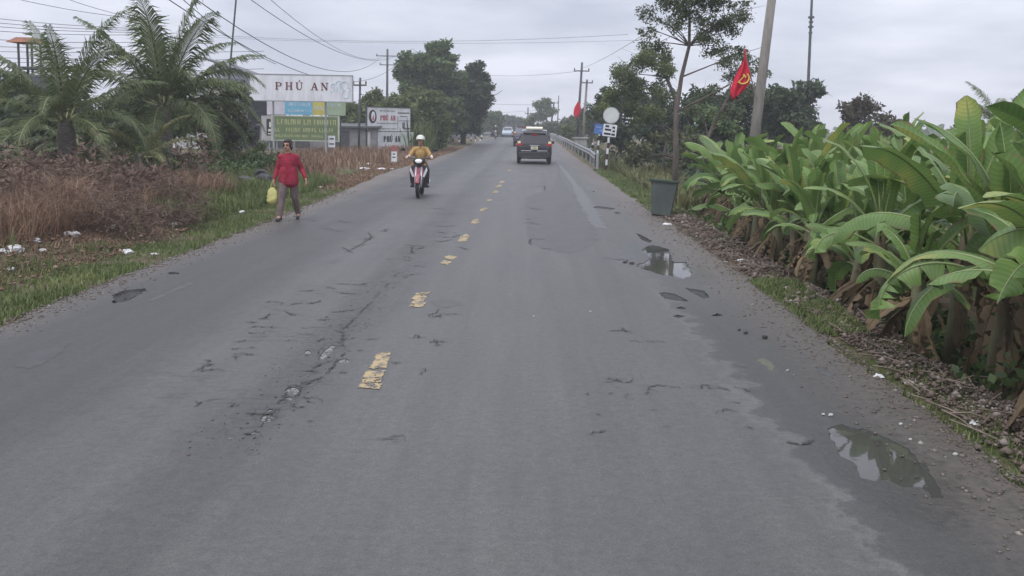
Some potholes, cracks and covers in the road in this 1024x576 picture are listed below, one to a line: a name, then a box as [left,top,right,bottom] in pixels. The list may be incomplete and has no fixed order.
crack [194,245,425,436]
crack [586,377,758,438]
pothole [686,288,709,299]
pothole [828,424,943,498]
pothole [659,292,688,301]
pothole [112,288,147,303]
